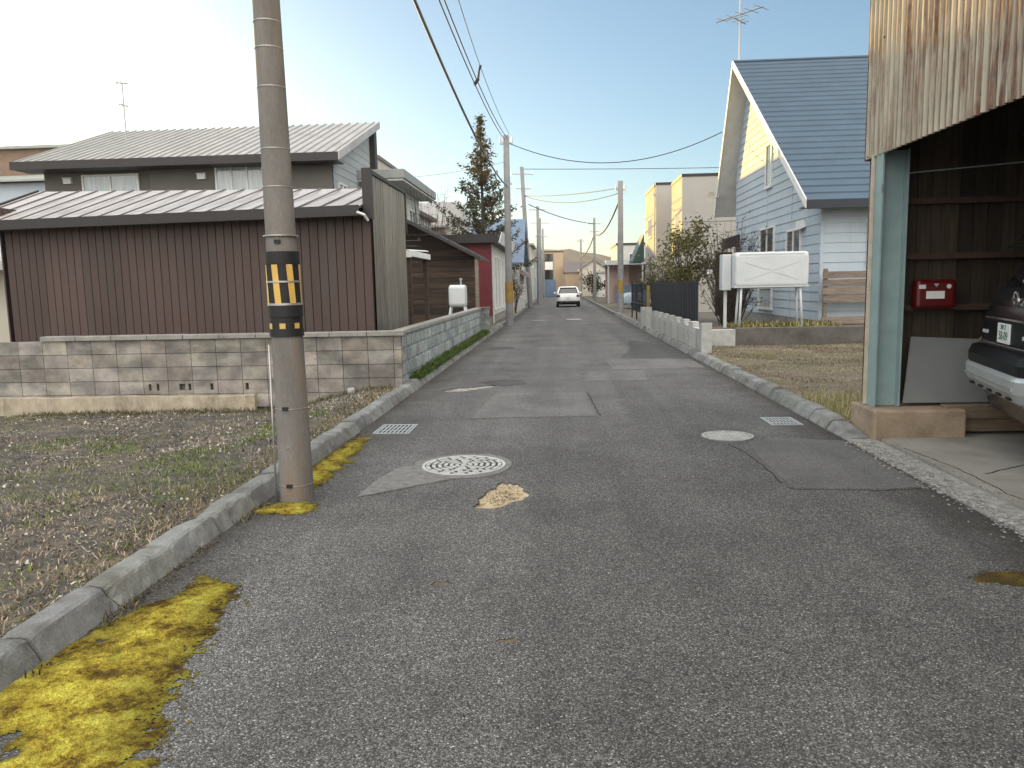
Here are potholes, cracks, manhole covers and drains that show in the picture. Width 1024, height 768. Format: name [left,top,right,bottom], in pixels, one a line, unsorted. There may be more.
drain grate [760,417,804,426]
manhole cover [414,454,512,479]
manhole cover [701,431,755,442]
drain grate [372,424,418,434]
pothole [472,481,530,509]
